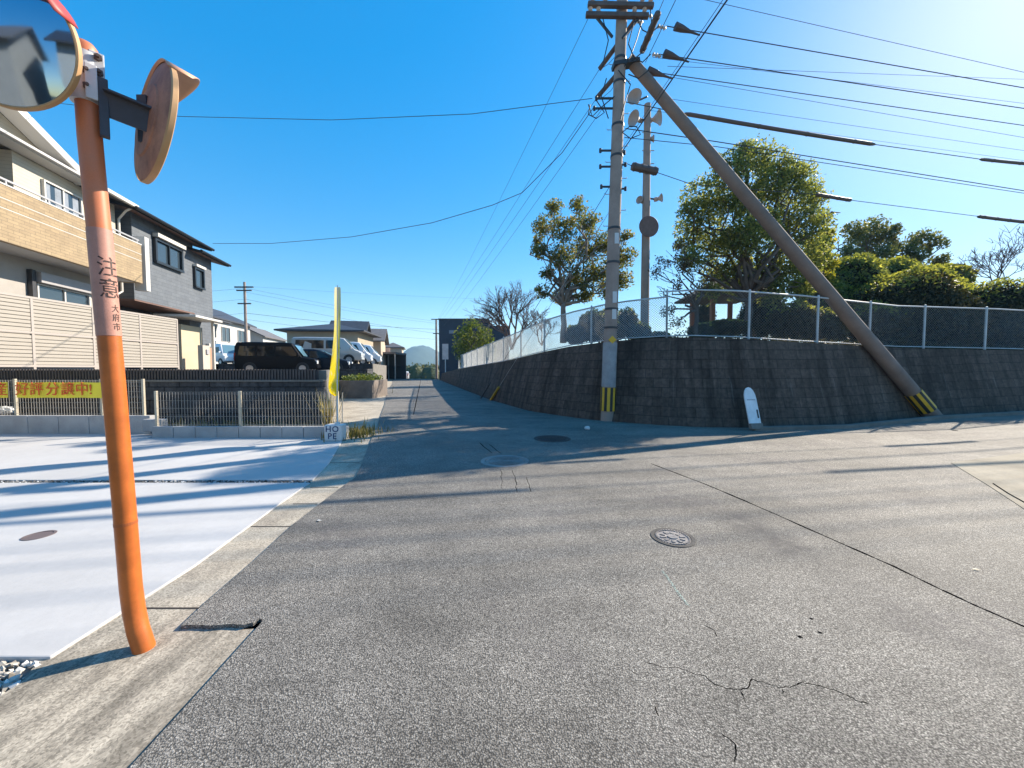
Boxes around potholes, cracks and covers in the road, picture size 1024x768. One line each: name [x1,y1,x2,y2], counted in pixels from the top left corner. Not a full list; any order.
manhole cover [650,528,696,548]
manhole cover [20,530,57,541]
manhole cover [481,455,529,468]
crack [630,663,868,704]
